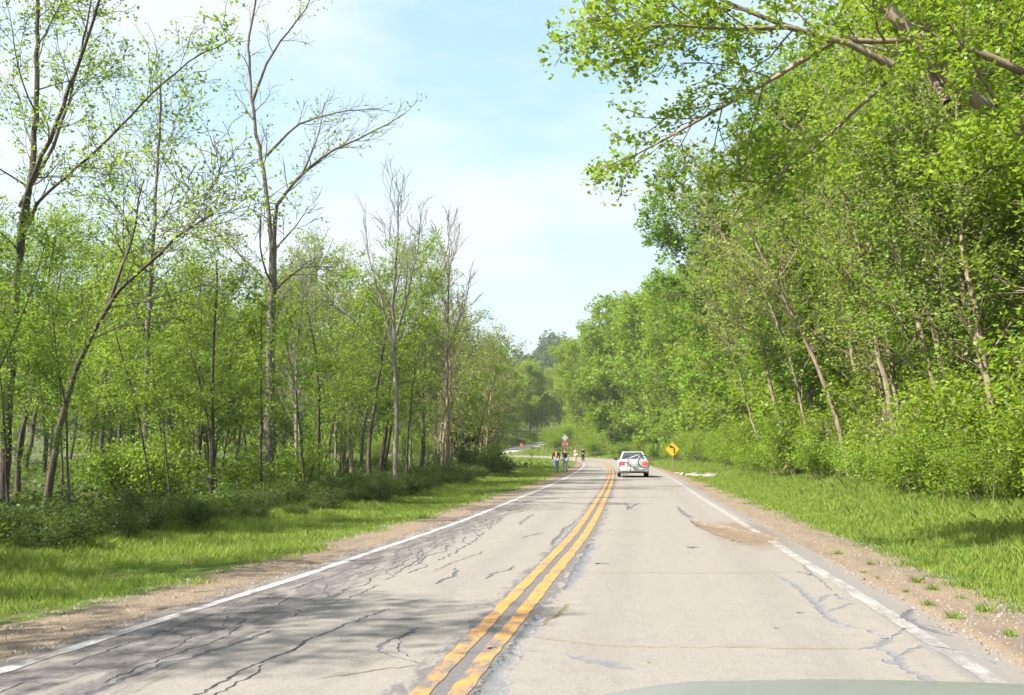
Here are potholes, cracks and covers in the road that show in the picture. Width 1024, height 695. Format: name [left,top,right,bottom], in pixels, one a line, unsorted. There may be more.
crack [0,498,1009,695]
